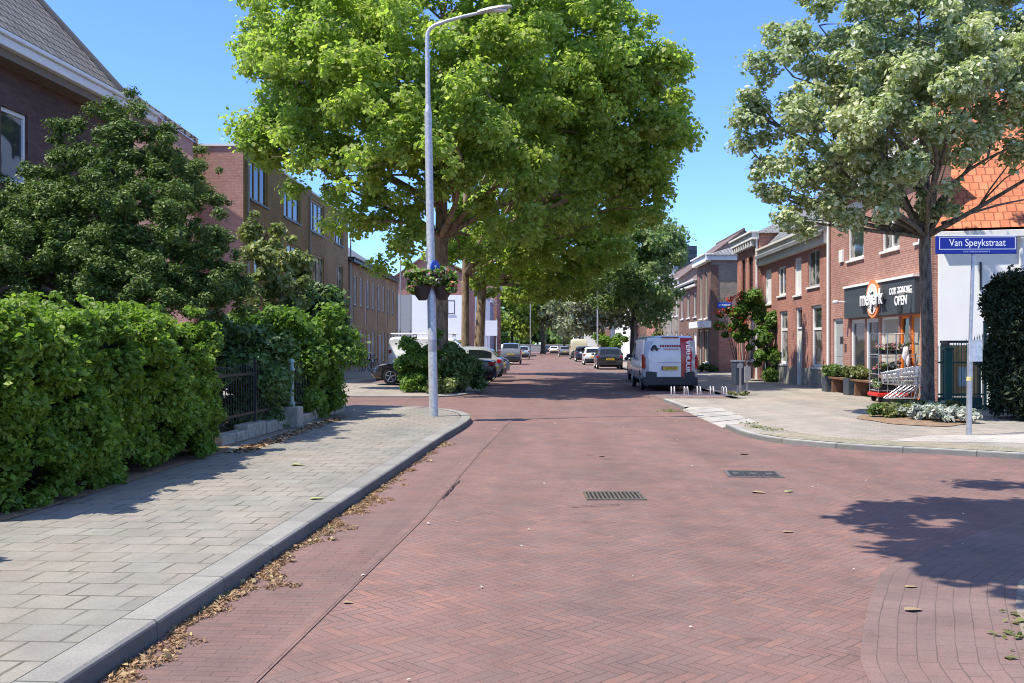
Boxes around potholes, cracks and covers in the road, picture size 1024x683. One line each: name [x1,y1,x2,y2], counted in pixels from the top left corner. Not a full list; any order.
drain grate [583,491,647,500]
manhole cover [723,470,785,478]
